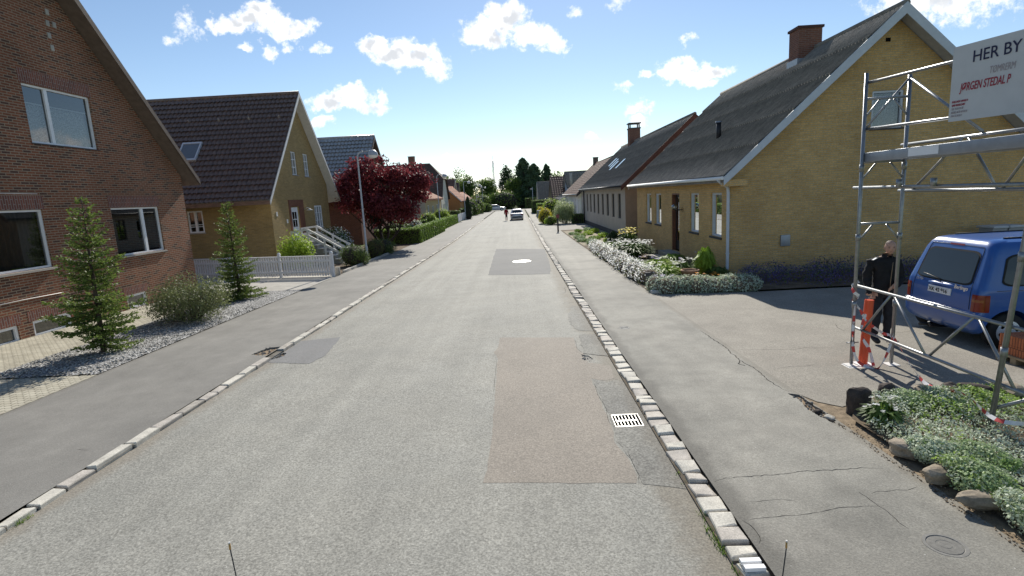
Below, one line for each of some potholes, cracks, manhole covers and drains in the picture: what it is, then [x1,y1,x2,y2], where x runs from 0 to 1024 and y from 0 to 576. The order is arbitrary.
crack [703,332,816,392]
crack [751,487,916,528]
pothole [252,347,279,356]
pothole [788,393,836,423]
manhole cover [921,533,970,557]
crack [720,467,862,480]
drain grate [611,413,644,427]
